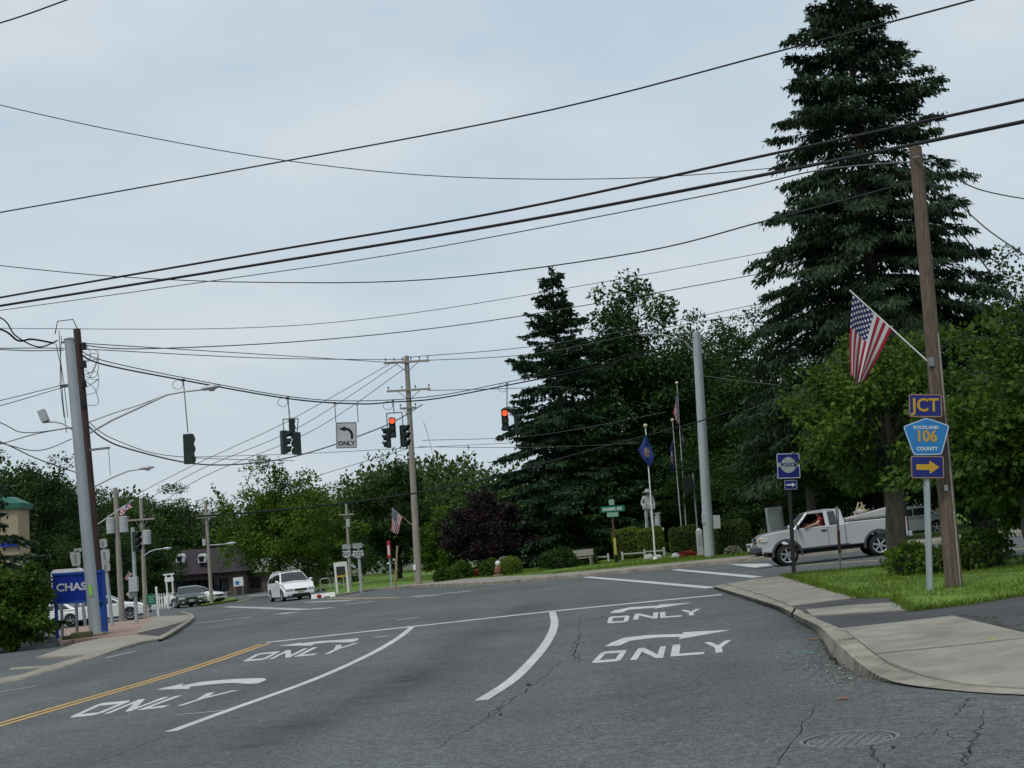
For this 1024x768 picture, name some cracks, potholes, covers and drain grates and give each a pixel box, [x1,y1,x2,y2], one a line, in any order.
manhole cover [799,730,900,748]
crack [869,744,886,768]
crack [777,709,814,765]
crack [433,616,604,753]
crack [895,697,997,768]
